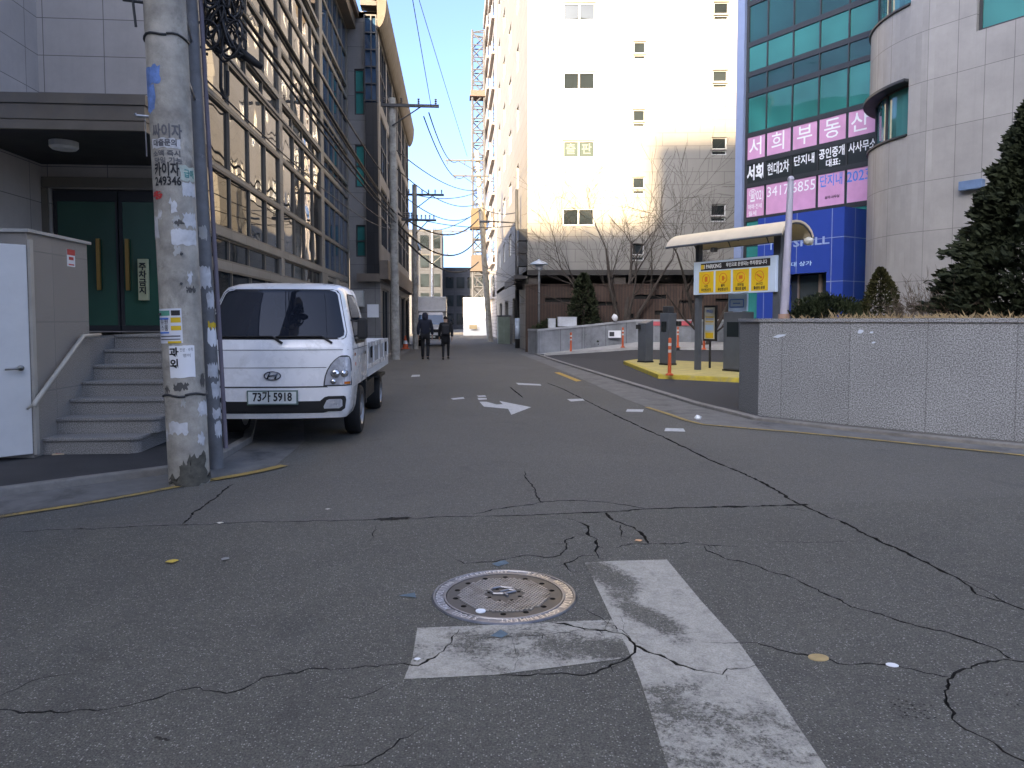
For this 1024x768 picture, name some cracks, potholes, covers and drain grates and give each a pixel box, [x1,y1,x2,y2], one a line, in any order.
manhole cover [432,570,577,625]
crack [24,473,1024,762]
